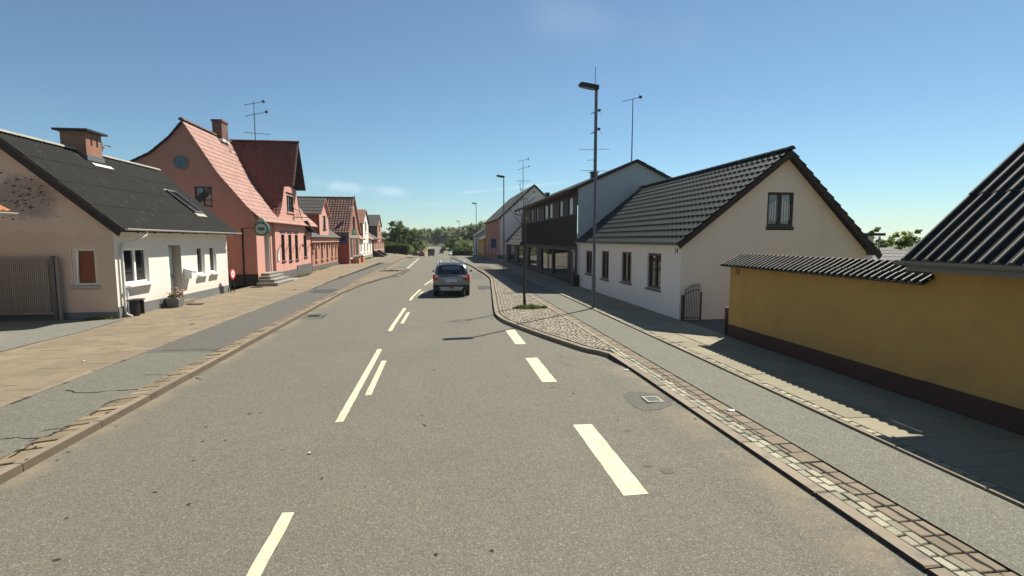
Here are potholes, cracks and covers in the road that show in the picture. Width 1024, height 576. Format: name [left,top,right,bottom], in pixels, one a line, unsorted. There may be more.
crack [2,382,139,458]
